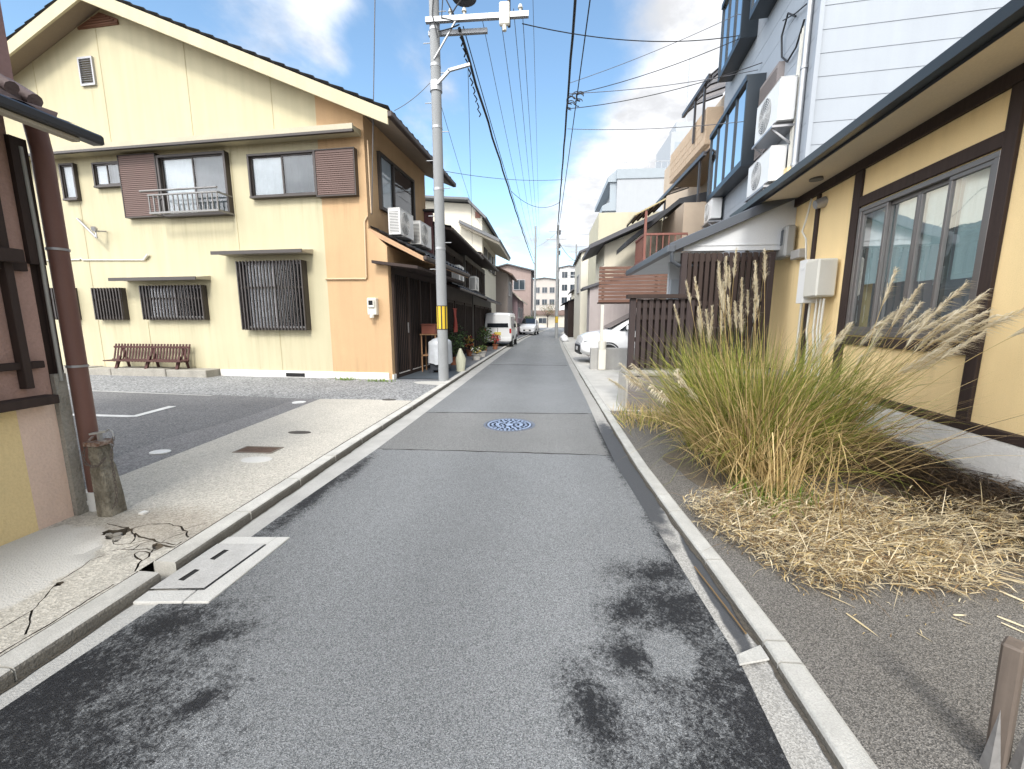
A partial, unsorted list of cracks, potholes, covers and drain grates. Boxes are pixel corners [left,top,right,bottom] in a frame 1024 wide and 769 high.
manhole cover [484,418,535,432]
crack [0,523,205,656]
manhole cover [232,446,284,454]
